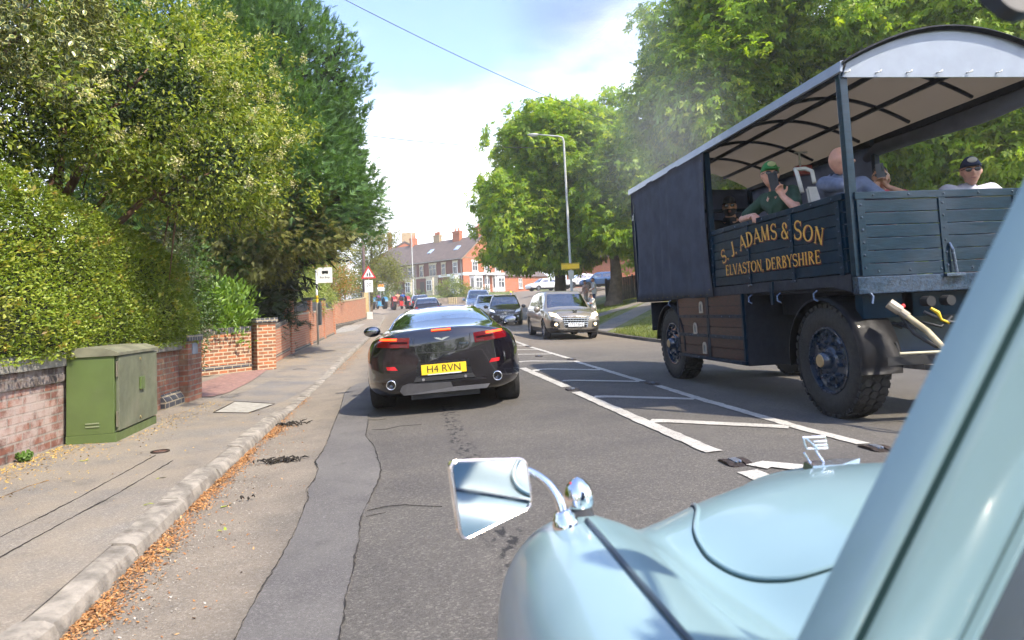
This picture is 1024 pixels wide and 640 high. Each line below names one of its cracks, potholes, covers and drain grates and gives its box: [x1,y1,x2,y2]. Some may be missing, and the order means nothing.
manhole cover [213,401,274,413]
crack [366,504,442,517]
